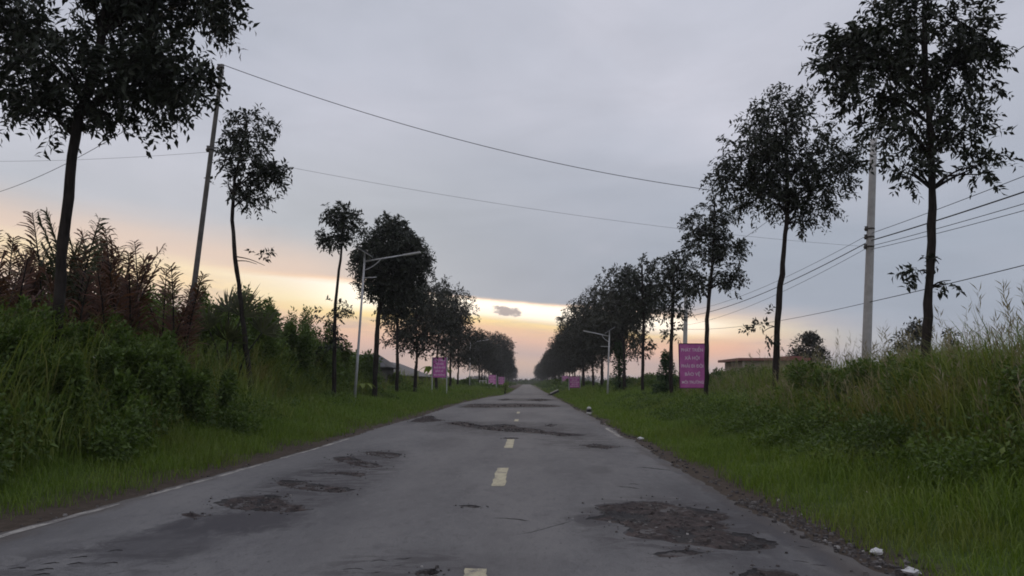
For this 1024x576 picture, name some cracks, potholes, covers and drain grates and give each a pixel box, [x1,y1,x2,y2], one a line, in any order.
pothole [333,456,383,468]
pothole [214,495,312,513]
pothole [585,501,779,551]
pothole [275,480,355,493]
pothole [409,415,443,423]
pothole [445,421,585,436]
